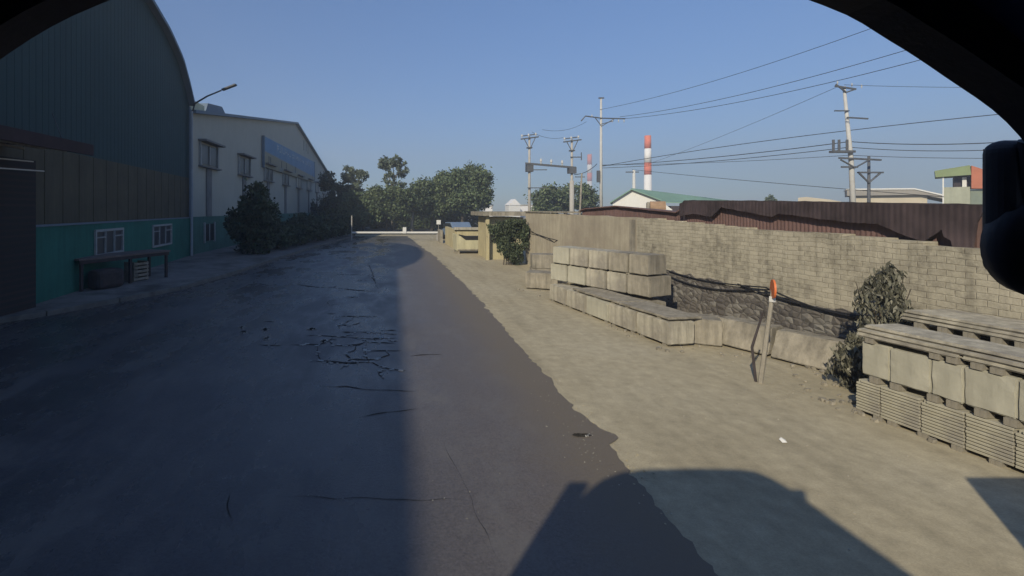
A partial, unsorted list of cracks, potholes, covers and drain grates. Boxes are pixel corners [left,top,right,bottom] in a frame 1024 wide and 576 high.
crack [258,264,442,391]
